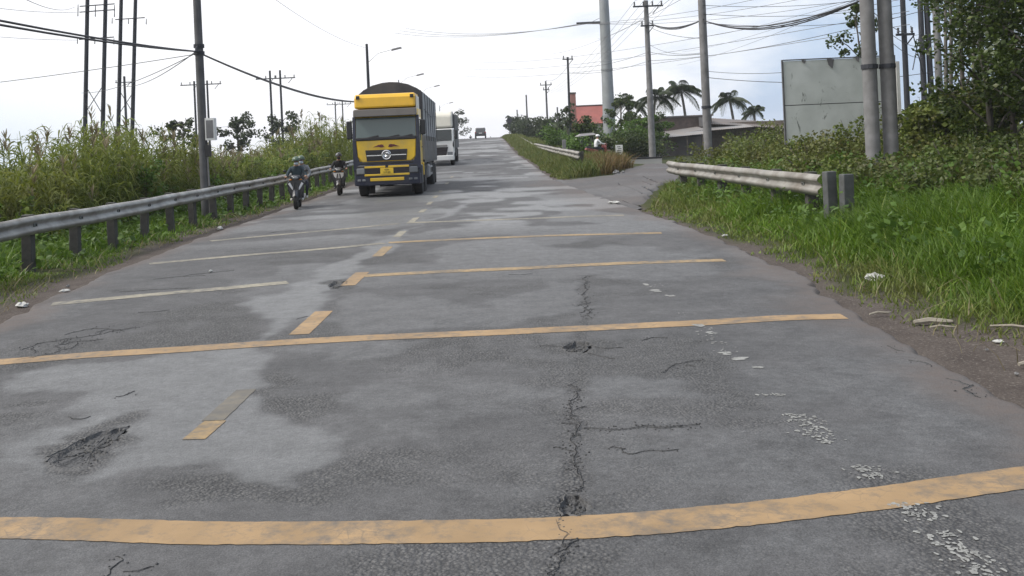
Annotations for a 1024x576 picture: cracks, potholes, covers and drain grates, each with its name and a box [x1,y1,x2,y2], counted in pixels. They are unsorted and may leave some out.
crack [577,276,594,318]
pothole [557,494,597,518]
crack [544,384,702,576]
crack [661,358,703,373]
crack [18,310,166,360]
crack [103,554,158,576]
pothole [561,341,590,354]
pothole [42,426,129,472]
